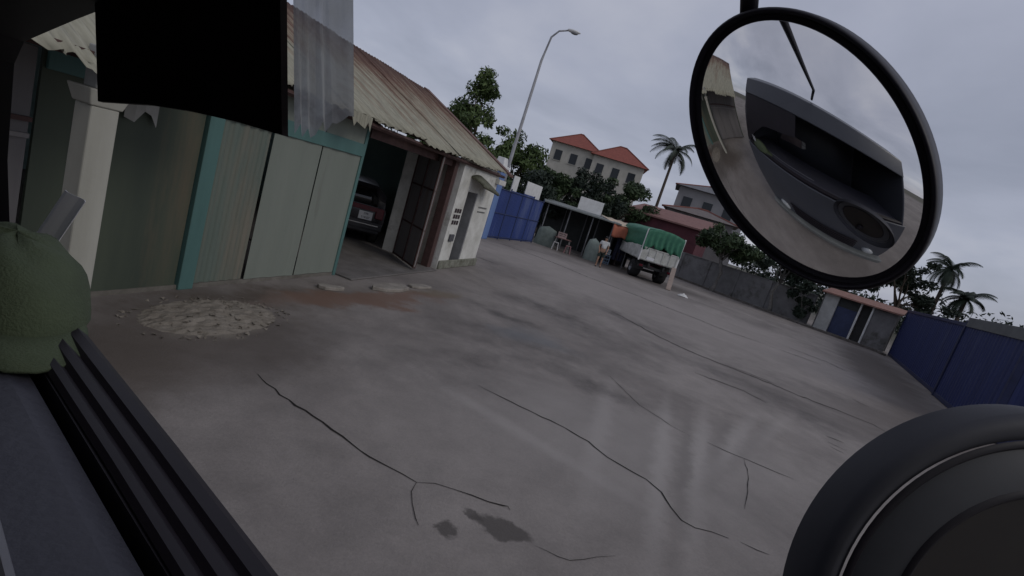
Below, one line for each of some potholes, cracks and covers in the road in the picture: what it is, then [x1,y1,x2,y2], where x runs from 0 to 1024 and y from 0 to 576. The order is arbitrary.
crack [482,387,767,554]
crack [714,445,788,504]
crack [258,374,509,523]
